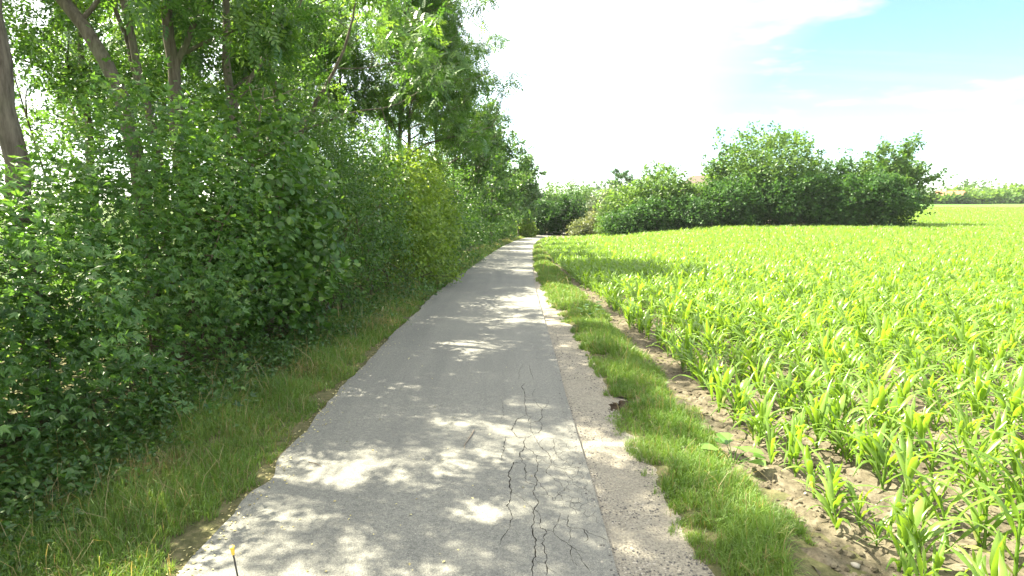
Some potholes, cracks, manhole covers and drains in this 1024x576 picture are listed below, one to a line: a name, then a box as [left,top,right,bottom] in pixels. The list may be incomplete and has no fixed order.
crack [500,384,606,576]
